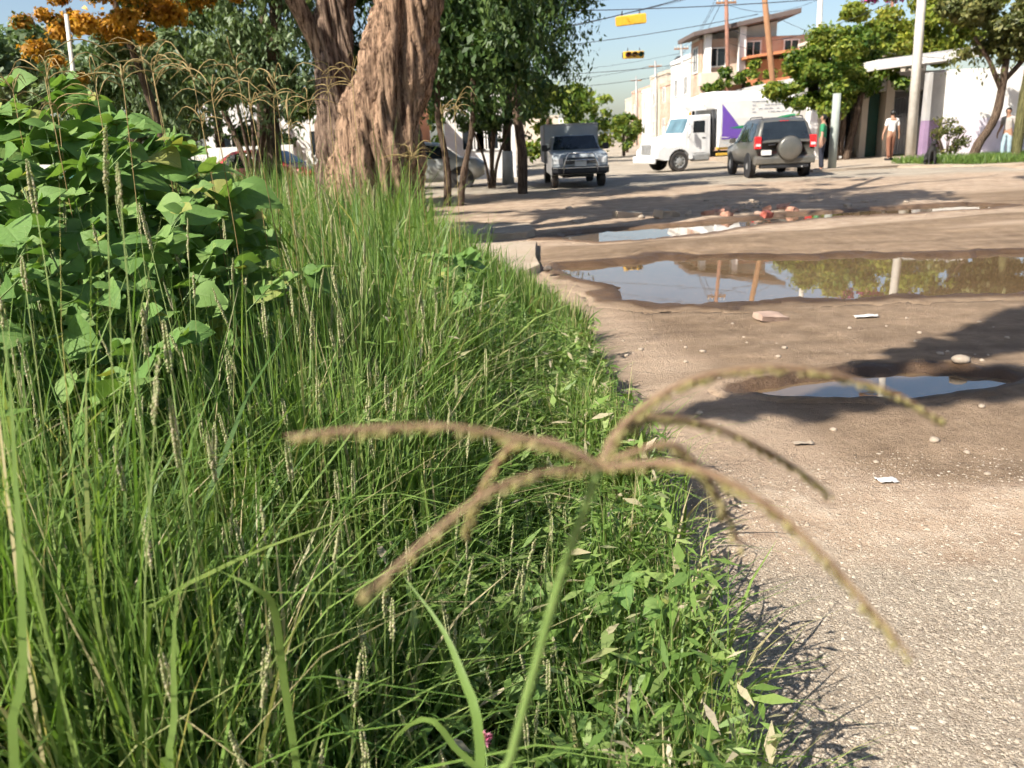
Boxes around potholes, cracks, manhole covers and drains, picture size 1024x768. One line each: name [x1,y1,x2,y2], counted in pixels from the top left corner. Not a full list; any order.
pothole [708,357,1024,405]
pothole [526,202,1024,245]
pothole [539,247,1024,314]
